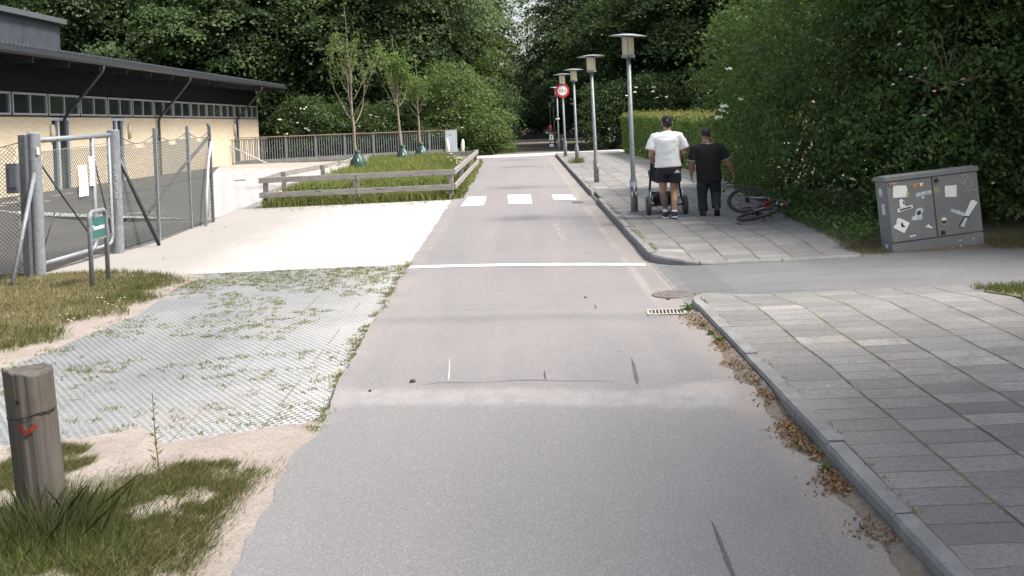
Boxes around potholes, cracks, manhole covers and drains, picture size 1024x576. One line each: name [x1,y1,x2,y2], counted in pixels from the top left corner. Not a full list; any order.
manhole cover [652,290,690,299]
